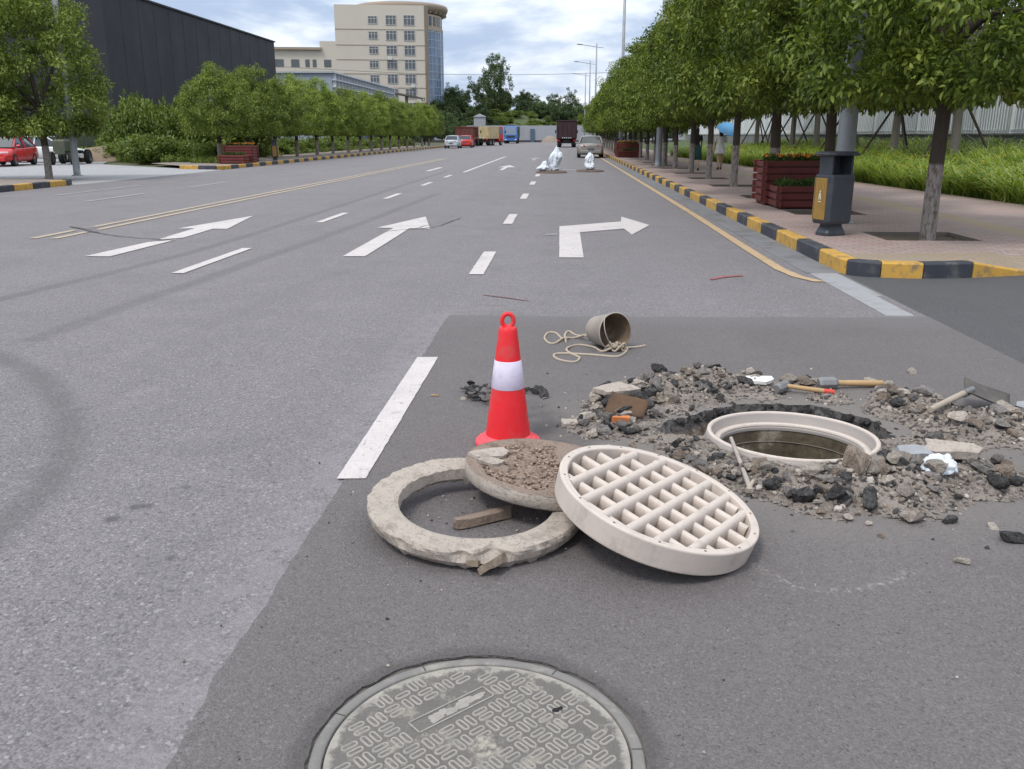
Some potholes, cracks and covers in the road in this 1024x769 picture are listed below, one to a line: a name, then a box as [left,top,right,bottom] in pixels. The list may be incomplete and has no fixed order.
manhole cover [304,656,650,769]
